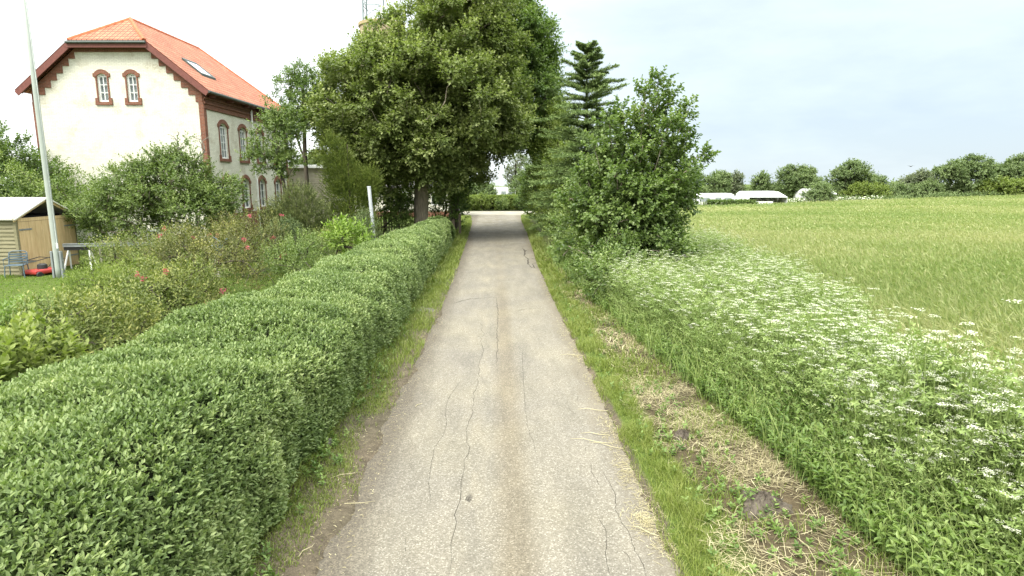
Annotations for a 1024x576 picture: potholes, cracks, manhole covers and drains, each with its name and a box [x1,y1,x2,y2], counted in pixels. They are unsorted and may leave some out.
crack [428,329,484,574]
crack [585,446,646,571]
